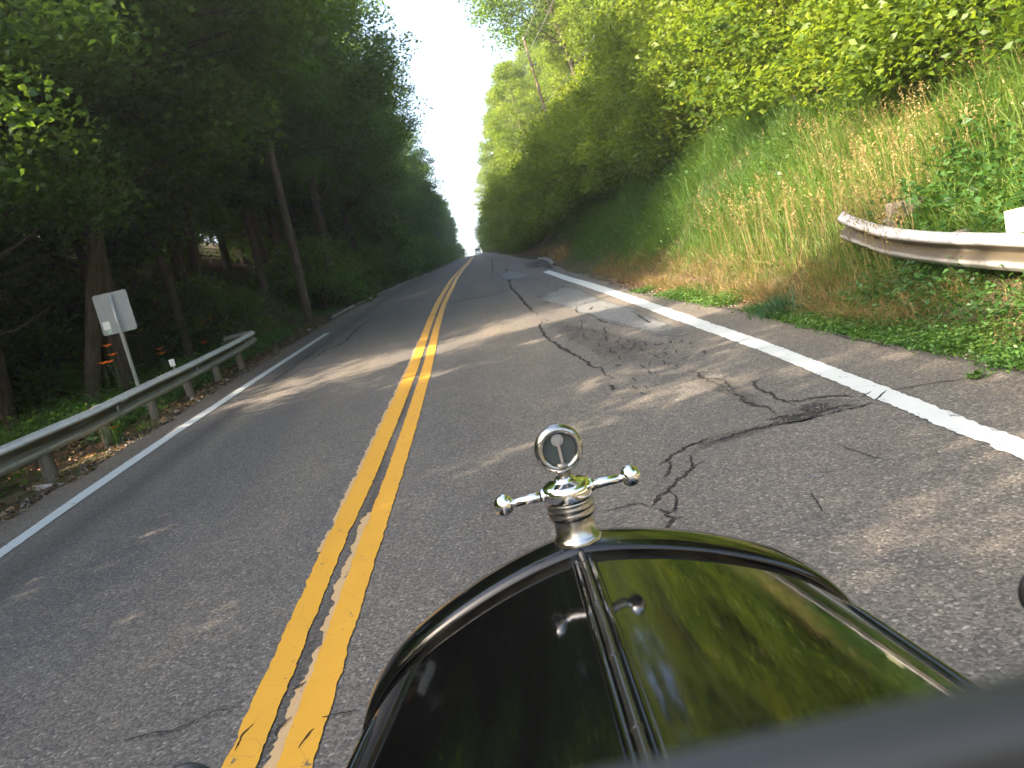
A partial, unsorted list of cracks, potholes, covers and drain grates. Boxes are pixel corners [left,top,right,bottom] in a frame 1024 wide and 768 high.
crack [124,706,253,750]
crack [269,321,365,384]
crack [428,277,960,528]
